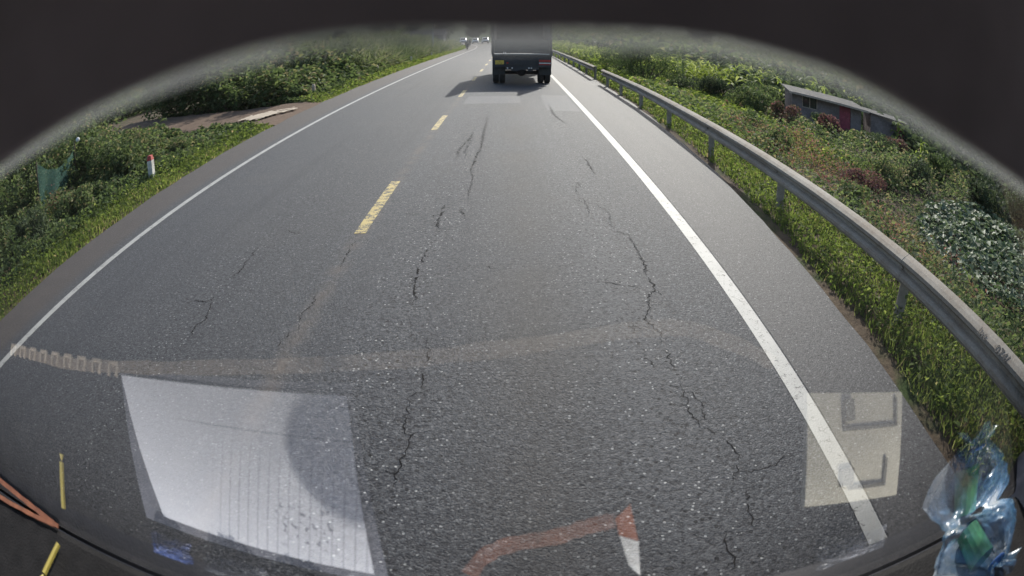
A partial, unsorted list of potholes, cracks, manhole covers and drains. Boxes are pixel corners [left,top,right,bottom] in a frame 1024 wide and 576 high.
crack [383,336,431,510]
crack [671,378,789,568]
crack [600,222,676,370]
crack [456,118,489,197]
crack [401,249,428,304]
